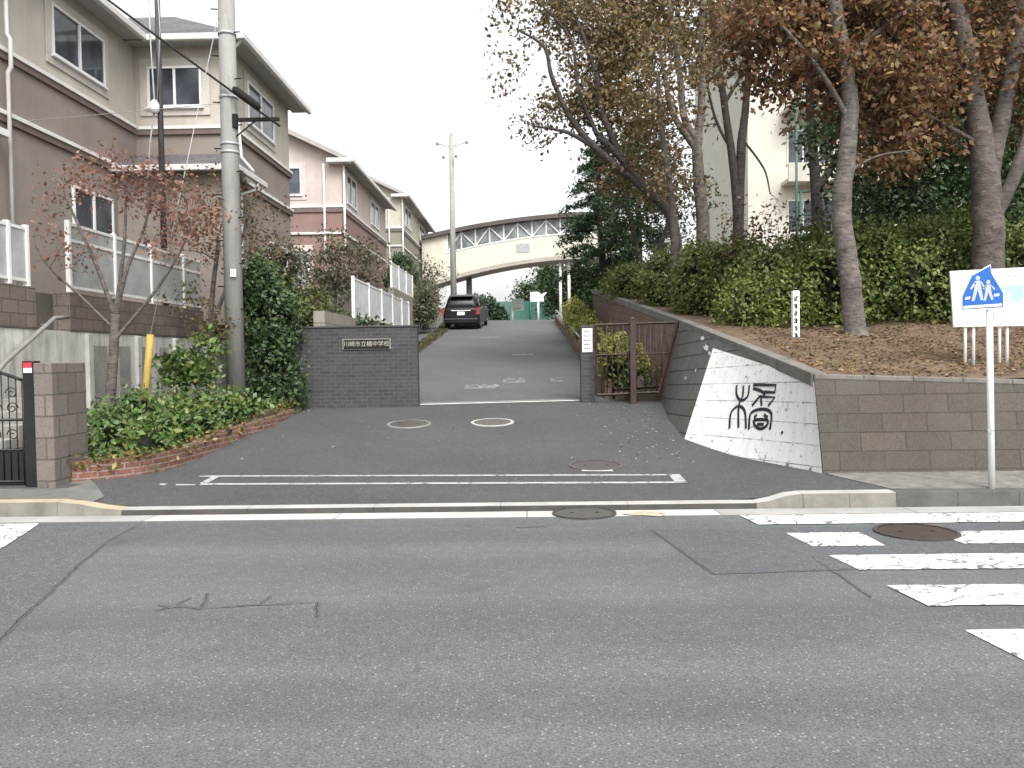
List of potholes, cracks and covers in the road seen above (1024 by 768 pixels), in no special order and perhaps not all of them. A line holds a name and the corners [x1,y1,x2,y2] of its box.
manhole cover [552,508,617,520]
crack [158,593,320,617]
crack [0,547,102,644]
manhole cover [569,460,623,470]
manhole cover [387,420,431,428]
manhole cover [873,523,962,542]
manhole cover [471,418,514,427]
